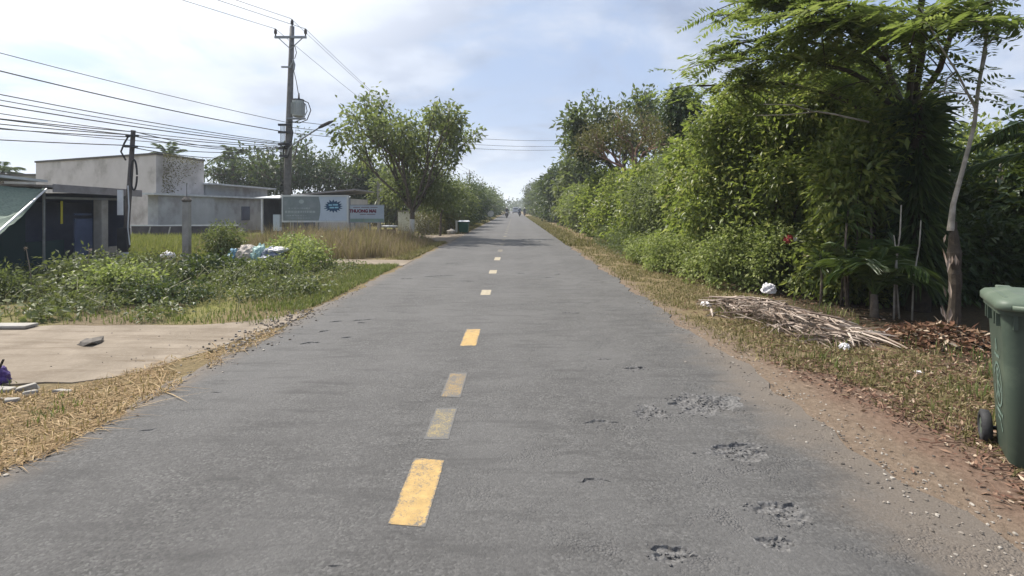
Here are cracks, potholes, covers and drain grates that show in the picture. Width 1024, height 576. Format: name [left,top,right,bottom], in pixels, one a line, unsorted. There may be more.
pothole [631,404,671,421]
pothole [644,543,700,567]
pothole [665,389,756,418]
pothole [691,440,776,465]
pothole [751,534,796,553]
pothole [742,501,814,527]
